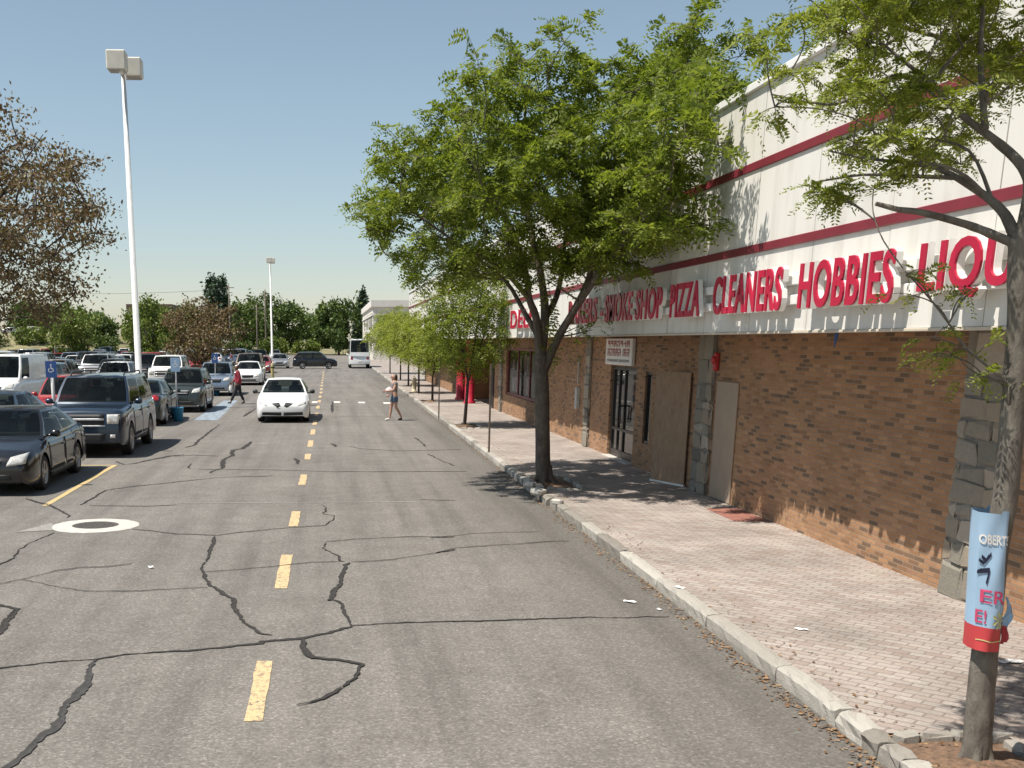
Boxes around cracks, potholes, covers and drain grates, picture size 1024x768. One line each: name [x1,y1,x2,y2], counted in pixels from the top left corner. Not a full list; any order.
crack [0,425,460,564]
manhole cover [17,519,140,533]
crack [0,505,669,768]
